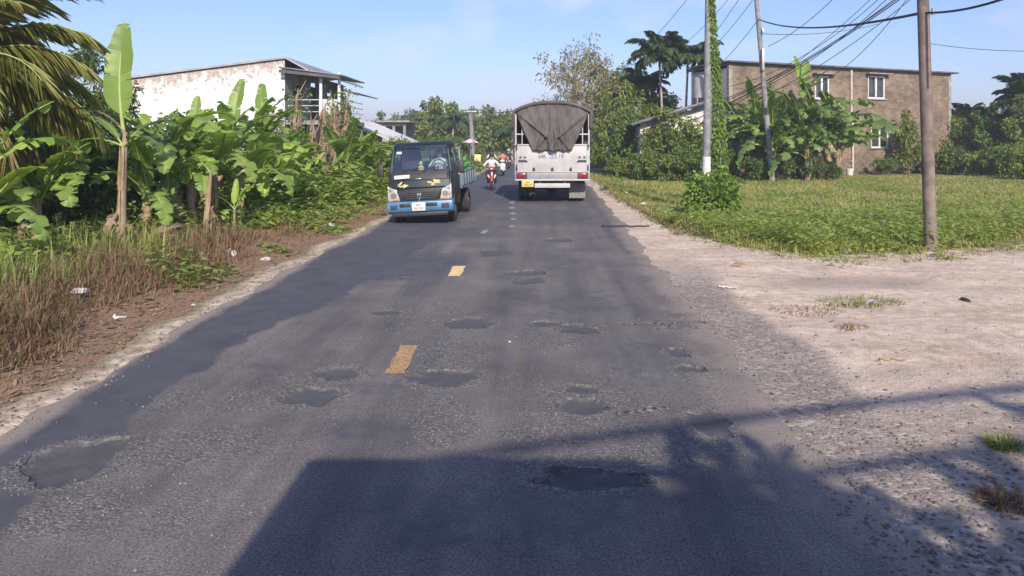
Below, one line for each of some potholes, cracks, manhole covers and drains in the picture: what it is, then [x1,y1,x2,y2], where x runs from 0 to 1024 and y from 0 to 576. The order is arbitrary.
pothole [527,466,655,492]
pothole [309,366,362,381]
pothole [665,347,692,358]
pothole [513,277,545,285]
pothole [405,369,480,388]
pothole [550,397,611,416]
pothole [556,323,599,335]
pothole [275,386,345,408]
pothole [672,363,708,373]
pothole [477,248,513,257]
pothole [559,383,599,394]
pothole [18,436,134,489]
